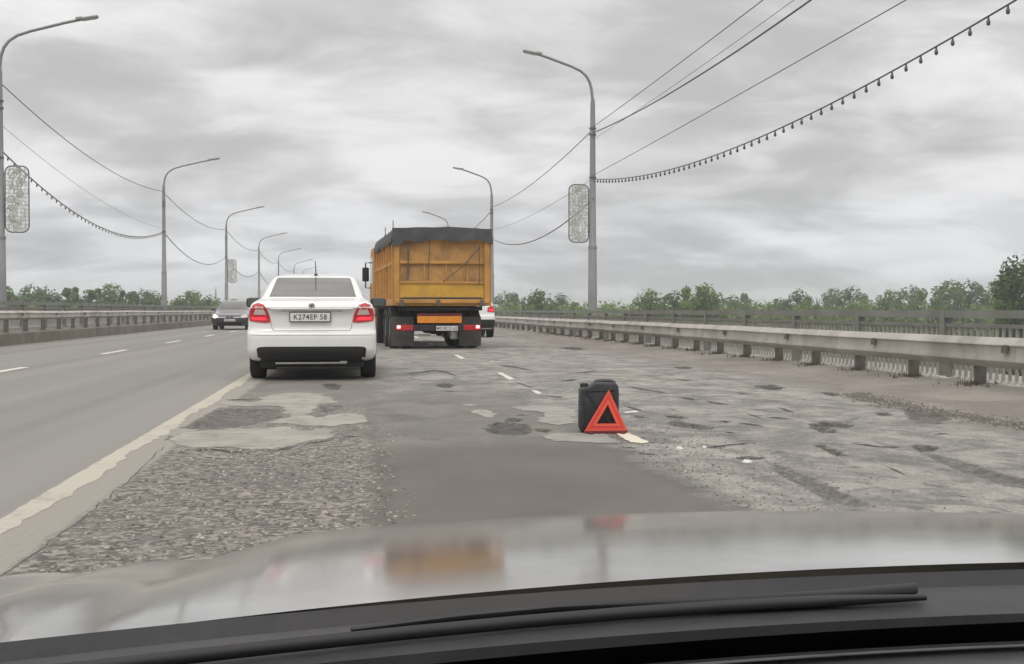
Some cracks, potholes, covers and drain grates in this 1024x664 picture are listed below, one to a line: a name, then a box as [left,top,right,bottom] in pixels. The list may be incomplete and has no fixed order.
pothole [907,444,943,452]
pothole [806,421,855,433]
pothole [179,407,285,429]
pothole [319,382,343,391]
pothole [480,413,534,436]
pothole [812,444,849,457]
